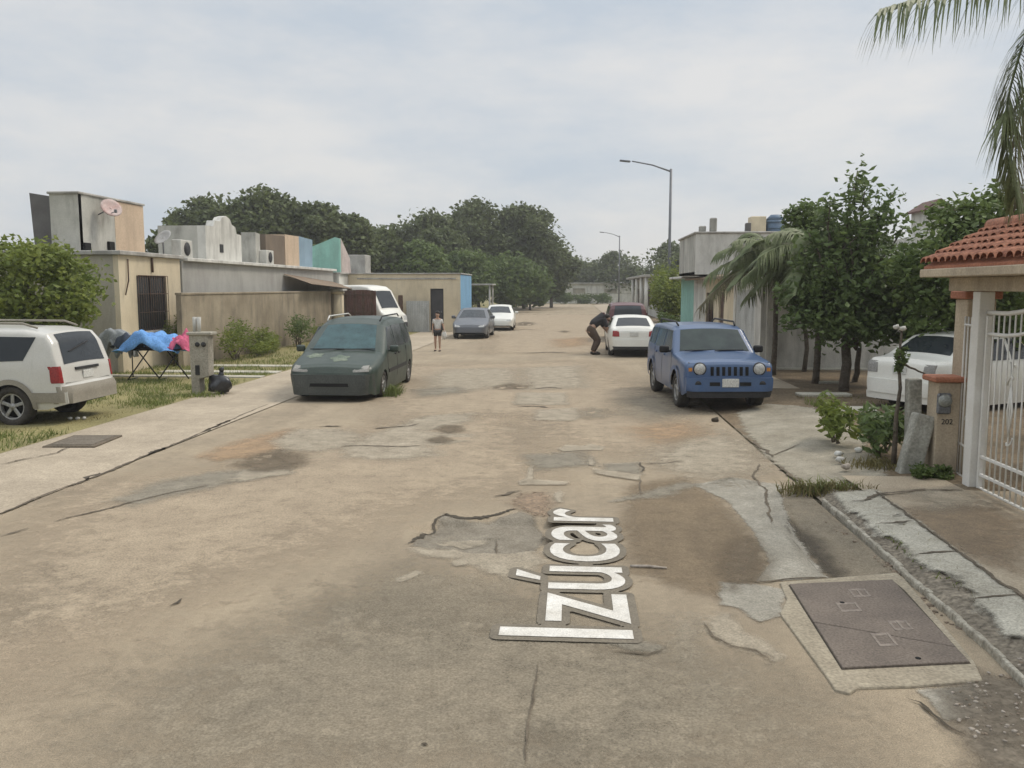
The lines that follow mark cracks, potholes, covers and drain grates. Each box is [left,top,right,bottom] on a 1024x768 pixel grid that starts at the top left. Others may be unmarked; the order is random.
pothole [414,512,544,554]
crack [524,663,538,762]
manhole cover [42,435,122,448]
crack [54,484,212,522]
manhole cover [780,573,983,695]
crack [752,440,801,522]
